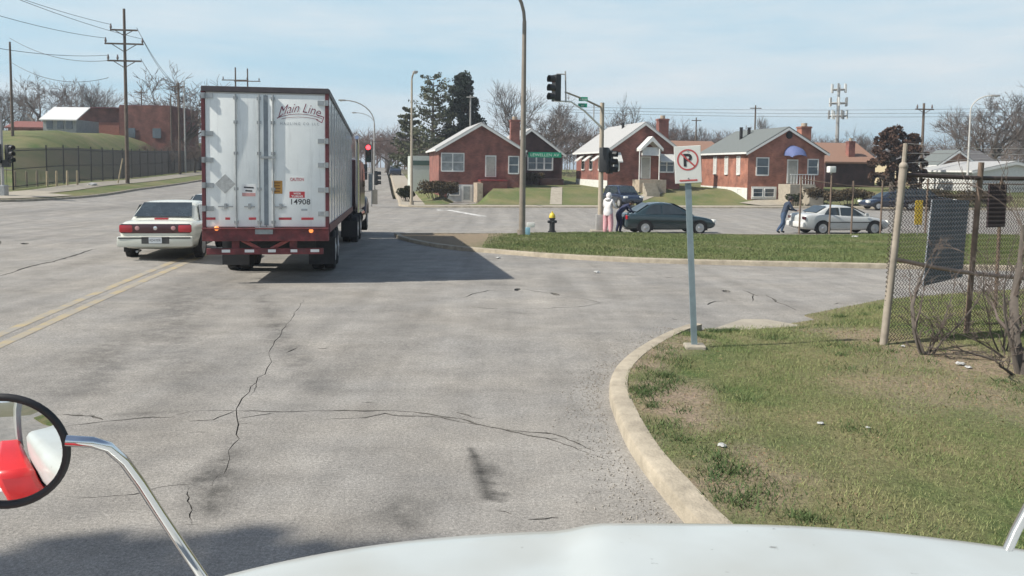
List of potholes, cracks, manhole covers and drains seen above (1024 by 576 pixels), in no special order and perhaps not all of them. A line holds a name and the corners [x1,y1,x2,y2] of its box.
crack [88,484,193,525]
crack [64,301,604,485]
